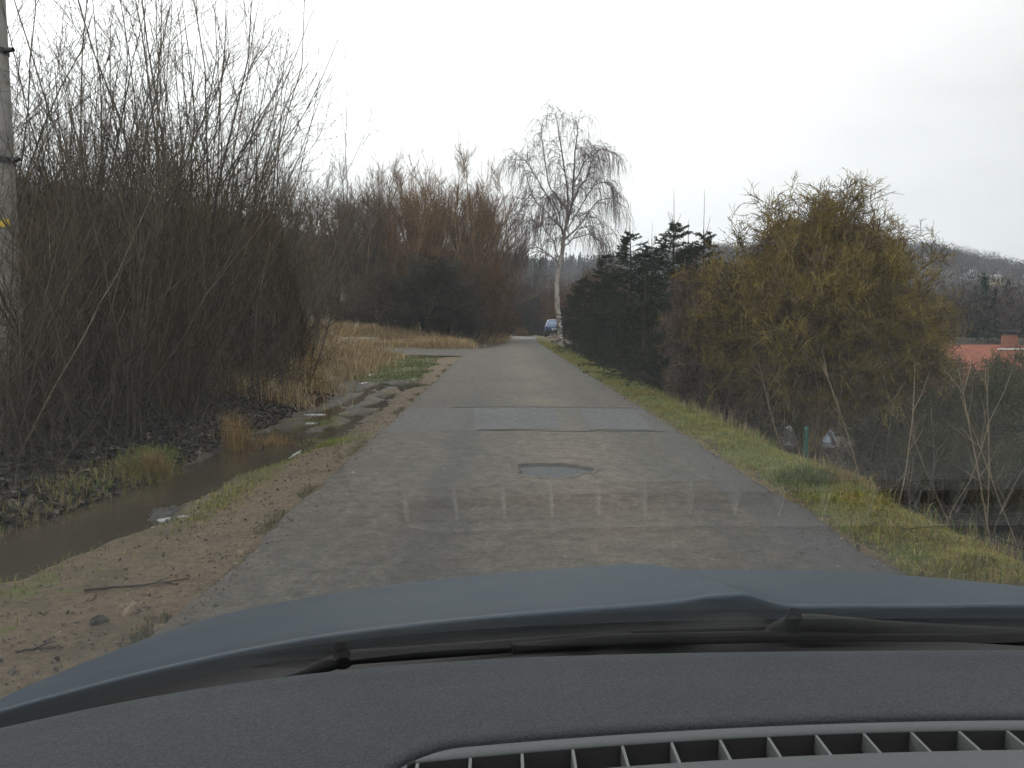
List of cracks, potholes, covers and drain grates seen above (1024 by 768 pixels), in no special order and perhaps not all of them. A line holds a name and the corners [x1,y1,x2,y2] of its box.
pothole [512,462,602,480]
